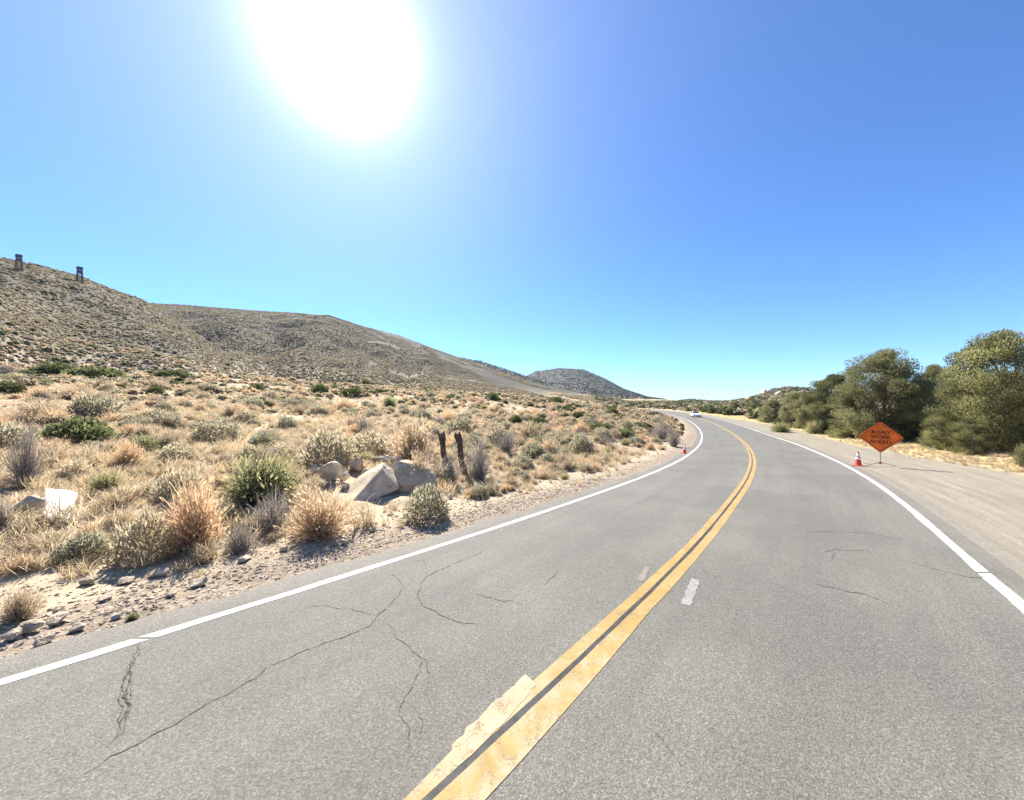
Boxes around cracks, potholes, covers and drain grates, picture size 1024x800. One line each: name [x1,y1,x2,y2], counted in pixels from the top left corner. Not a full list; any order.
crack [85,552,481,773]
